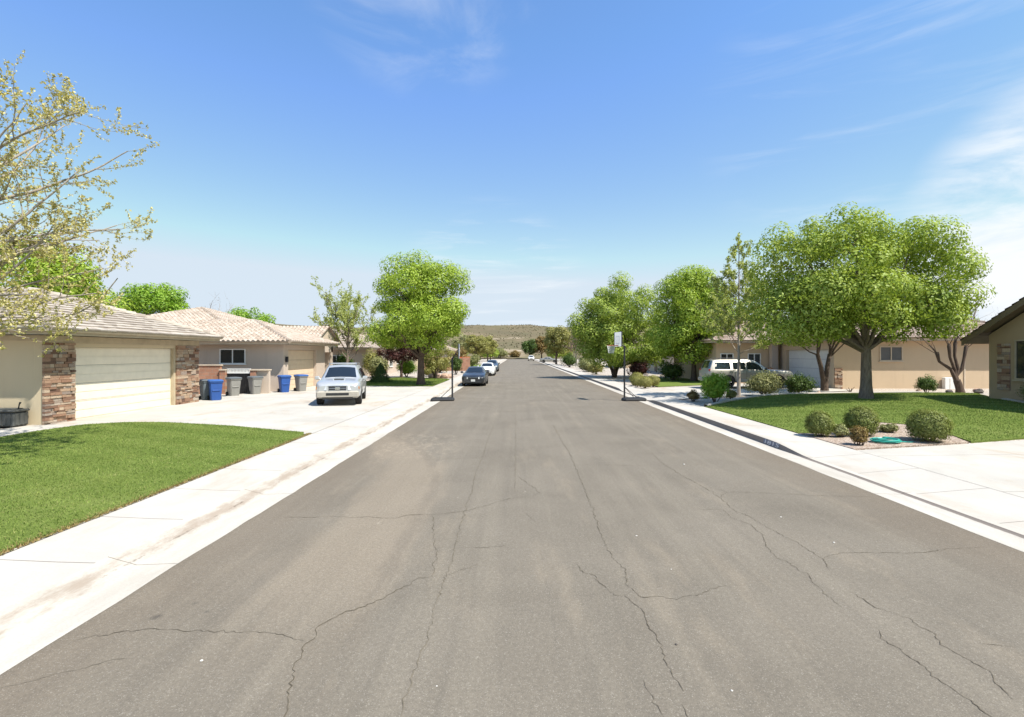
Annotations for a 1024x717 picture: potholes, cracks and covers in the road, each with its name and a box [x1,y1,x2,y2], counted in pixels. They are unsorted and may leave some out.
crack [655,456,976,605]
crack [555,429,720,717]
crack [856,594,1013,699]
crack [76,476,536,717]
crack [880,633,992,717]
